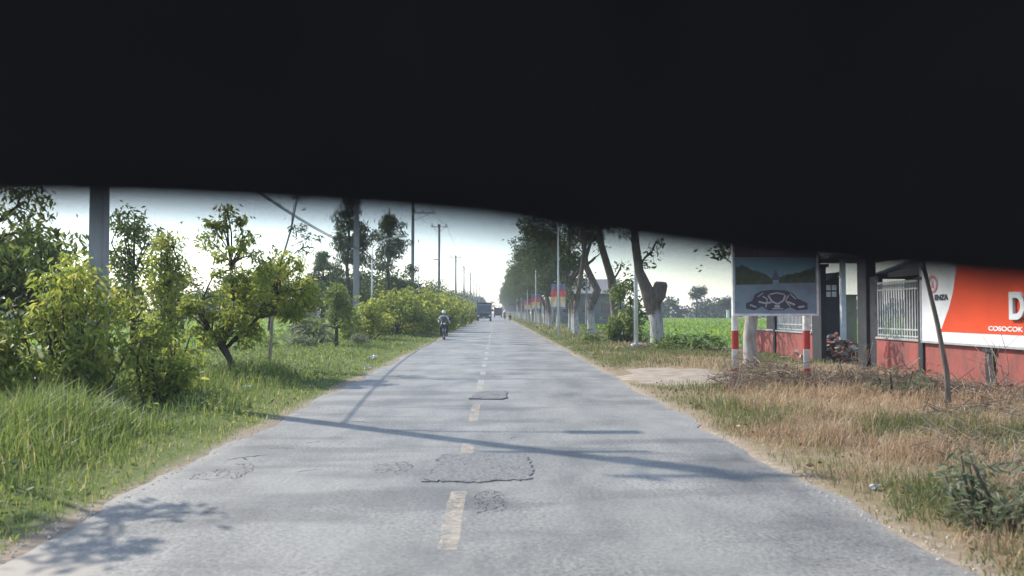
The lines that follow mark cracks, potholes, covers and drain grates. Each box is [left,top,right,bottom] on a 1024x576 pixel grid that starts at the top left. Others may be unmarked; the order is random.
crack [189,441,320,480]
